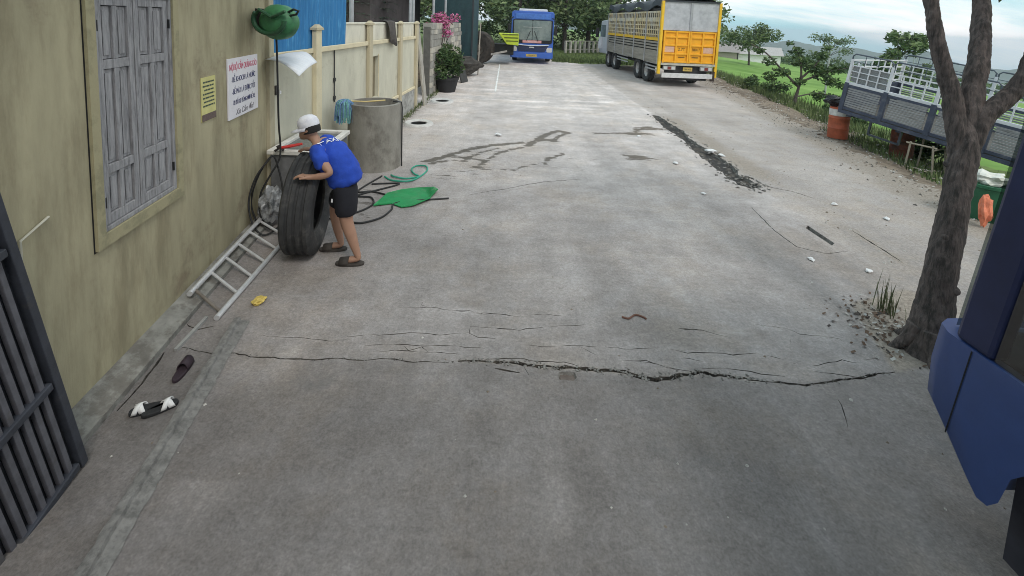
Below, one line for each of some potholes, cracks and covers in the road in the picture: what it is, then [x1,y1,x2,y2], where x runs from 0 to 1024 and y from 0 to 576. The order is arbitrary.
crack [117,353,164,411]
crack [752,208,900,261]
crack [182,302,894,426]
manhole cover [404,119,433,128]
